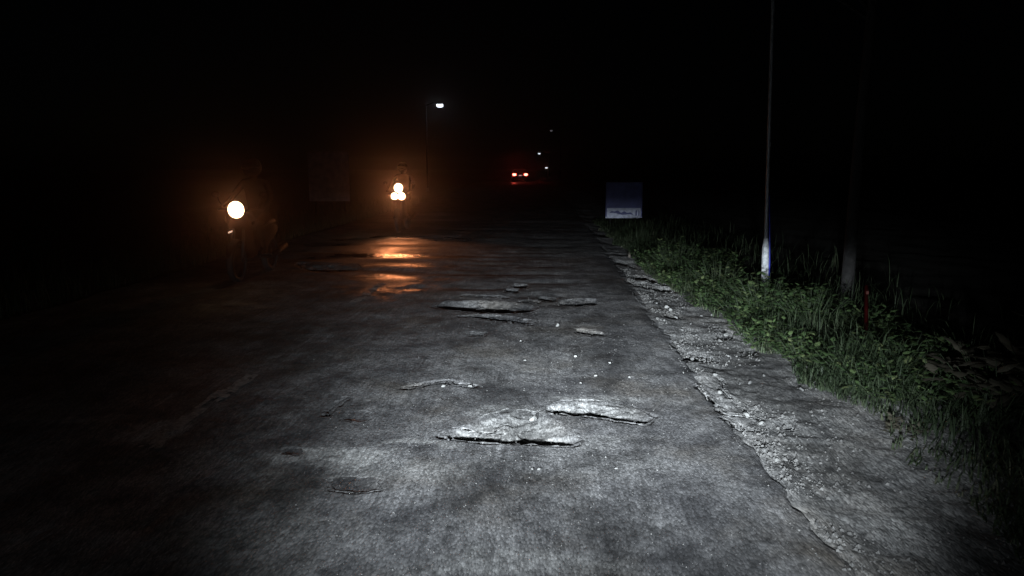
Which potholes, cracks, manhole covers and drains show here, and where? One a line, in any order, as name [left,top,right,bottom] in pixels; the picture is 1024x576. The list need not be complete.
pothole [282,447,303,455]
pothole [574,329,607,337]
pothole [437,408,583,447]
pothole [329,477,383,494]
pothole [458,314,535,325]
pothole [556,298,600,307]
pothole [433,301,538,314]
pothole [541,400,657,426]
crack [324,397,350,416]
crack [697,378,764,432]
